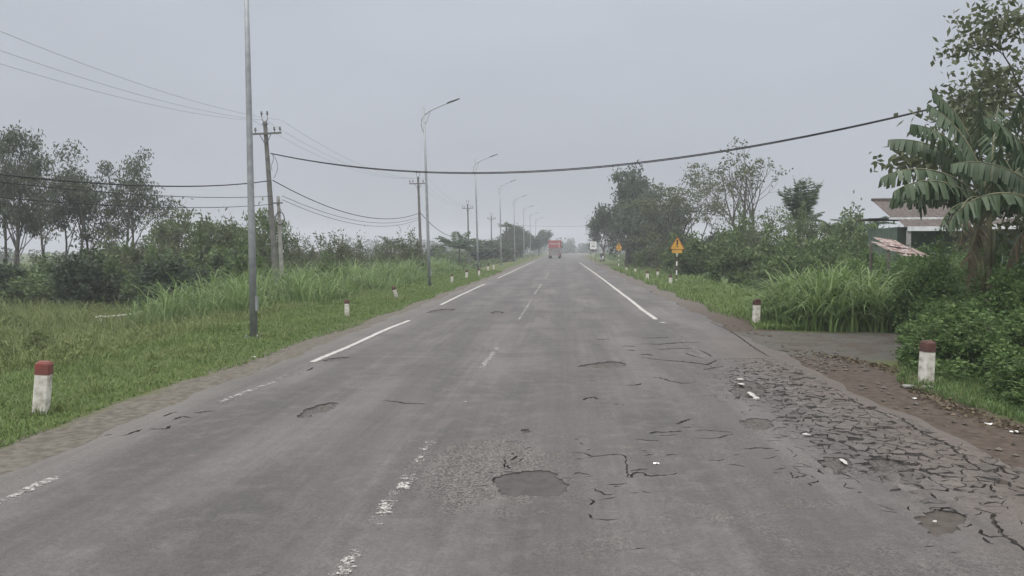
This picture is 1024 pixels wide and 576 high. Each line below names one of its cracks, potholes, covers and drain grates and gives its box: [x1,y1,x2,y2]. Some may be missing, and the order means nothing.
pothole [297,402,338,418]
pothole [914,509,967,537]
pothole [493,470,569,497]
crack [598,322,769,385]
crack [694,358,1024,527]
crack [105,411,210,436]
crack [924,507,1024,553]
crack [561,419,787,521]
